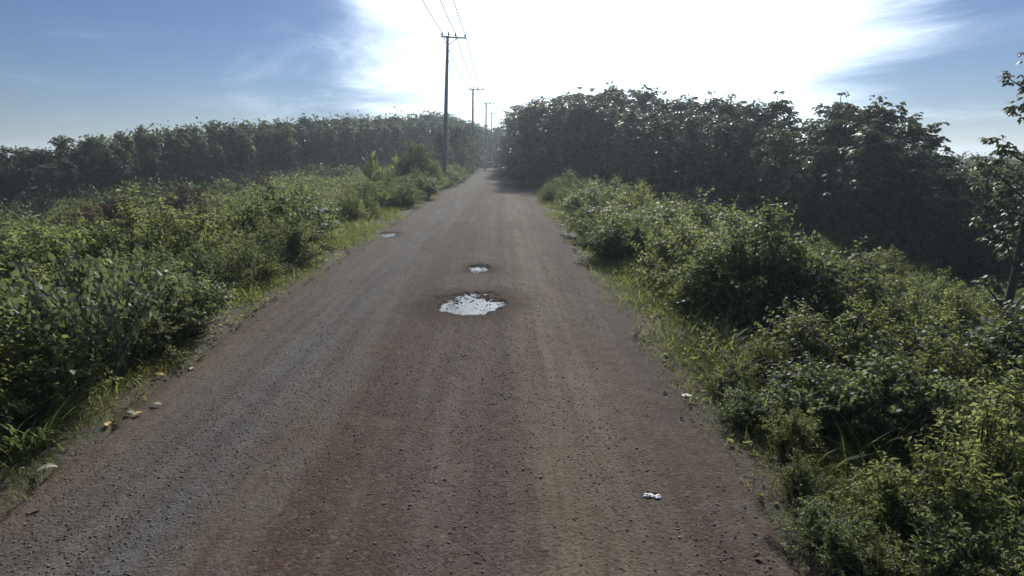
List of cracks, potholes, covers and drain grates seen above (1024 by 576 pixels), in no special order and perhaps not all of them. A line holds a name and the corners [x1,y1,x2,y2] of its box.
pothole [464,262,498,273]
pothole [419,287,517,323]
